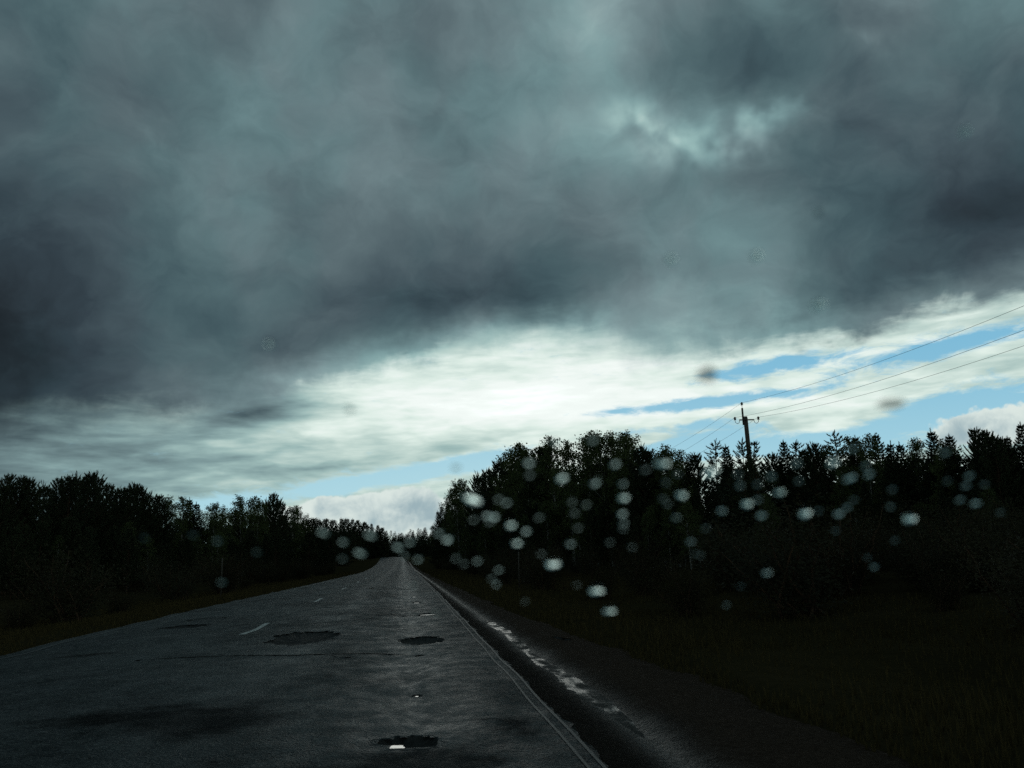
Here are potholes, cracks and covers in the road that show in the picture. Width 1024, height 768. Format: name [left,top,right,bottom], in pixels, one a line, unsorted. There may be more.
pothole [256,629,349,648]
pothole [369,734,447,751]
pothole [392,635,449,646]
crack [140,653,417,661]
